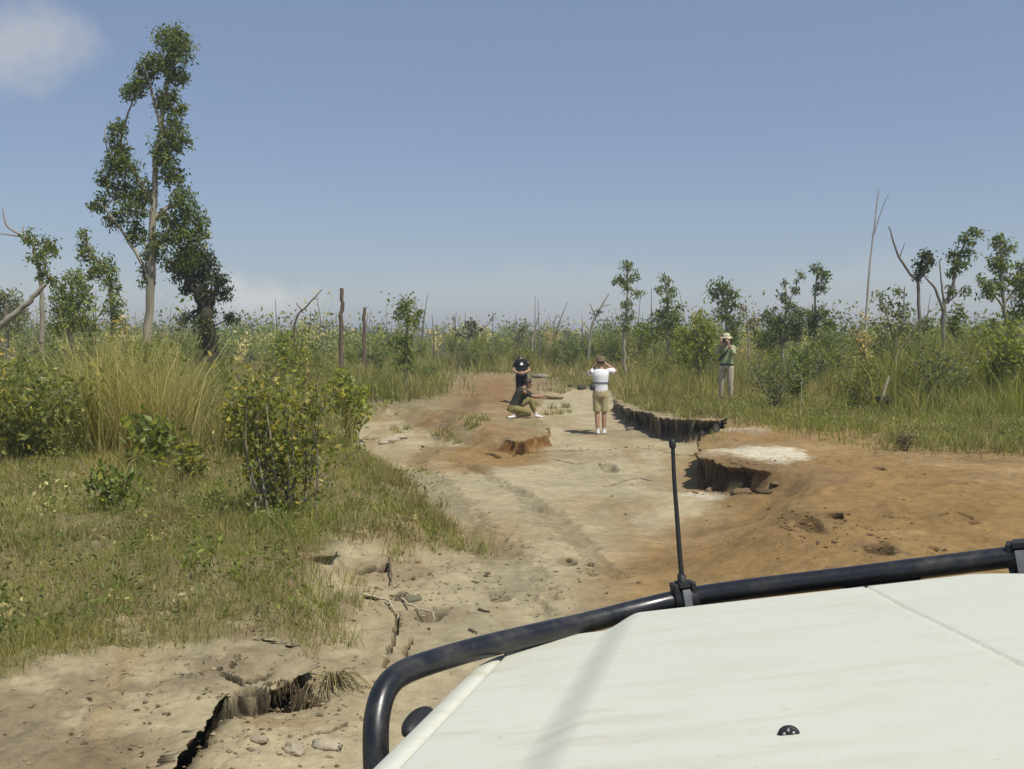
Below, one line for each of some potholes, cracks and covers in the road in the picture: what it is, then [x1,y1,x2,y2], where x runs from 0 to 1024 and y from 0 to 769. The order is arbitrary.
crack [382,611,413,668]
crack [173,653,327,769]
pothole [597,462,624,473]
pothole [860,541,906,556]
pothole [790,514,832,535]
